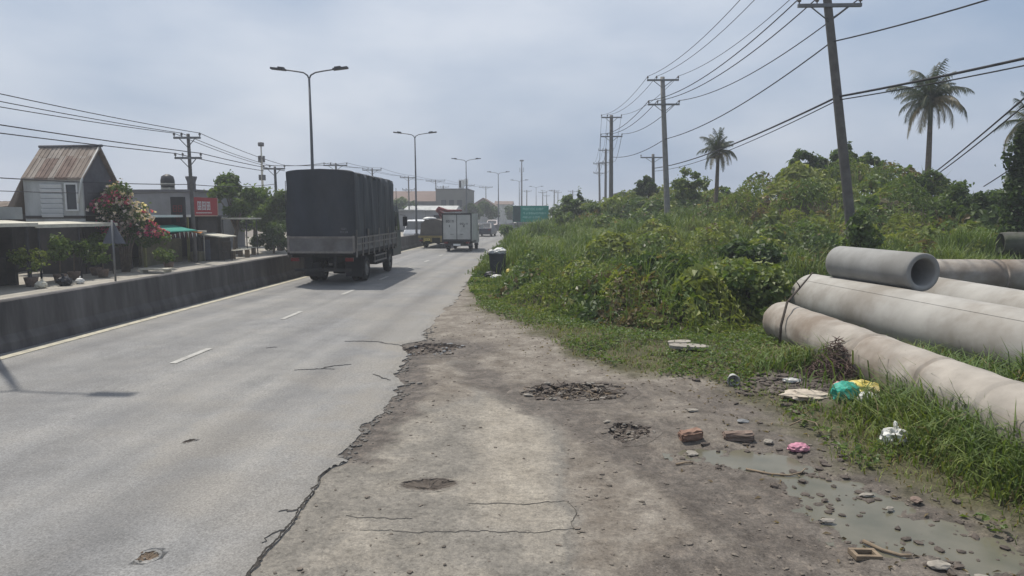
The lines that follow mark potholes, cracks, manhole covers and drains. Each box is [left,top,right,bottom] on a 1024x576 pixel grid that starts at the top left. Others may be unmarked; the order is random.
pothole [397,477,461,492]
pothole [507,380,642,405]
pothole [402,341,476,358]
crack [246,461,577,576]
pothole [594,421,663,447]
pothole [134,549,164,565]
